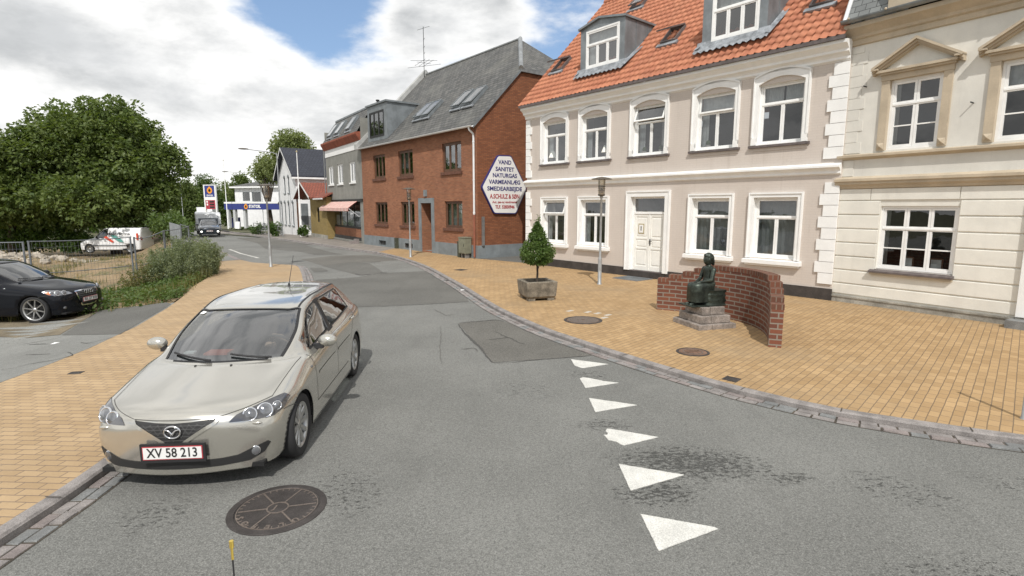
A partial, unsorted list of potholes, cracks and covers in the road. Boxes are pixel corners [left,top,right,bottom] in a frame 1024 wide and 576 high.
manhole cover [564,316,602,324]
manhole cover [676,348,710,356]
manhole cover [225,485,327,536]
